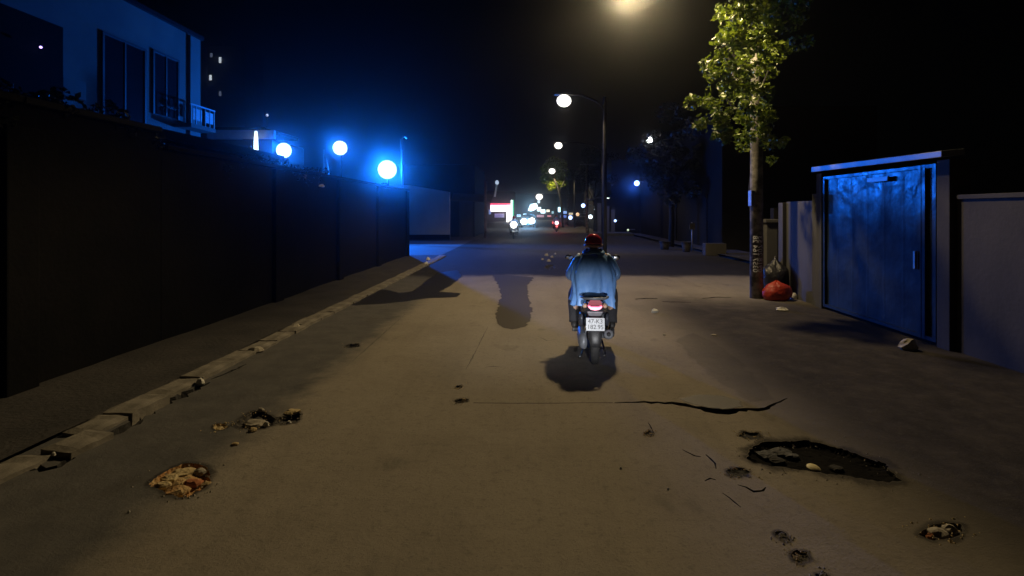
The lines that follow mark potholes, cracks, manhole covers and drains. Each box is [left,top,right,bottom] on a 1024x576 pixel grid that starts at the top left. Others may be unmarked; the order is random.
pothole [902,516,980,545]
pothole [130,460,225,504]
crack [616,398,788,433]
pothole [720,465,763,480]
pothole [224,410,284,432]
pothole [739,435,930,491]
pothole [770,530,796,545]
pothole [783,548,812,567]
crack [684,450,766,506]
pothole [200,422,232,433]
pothole [275,409,312,426]
